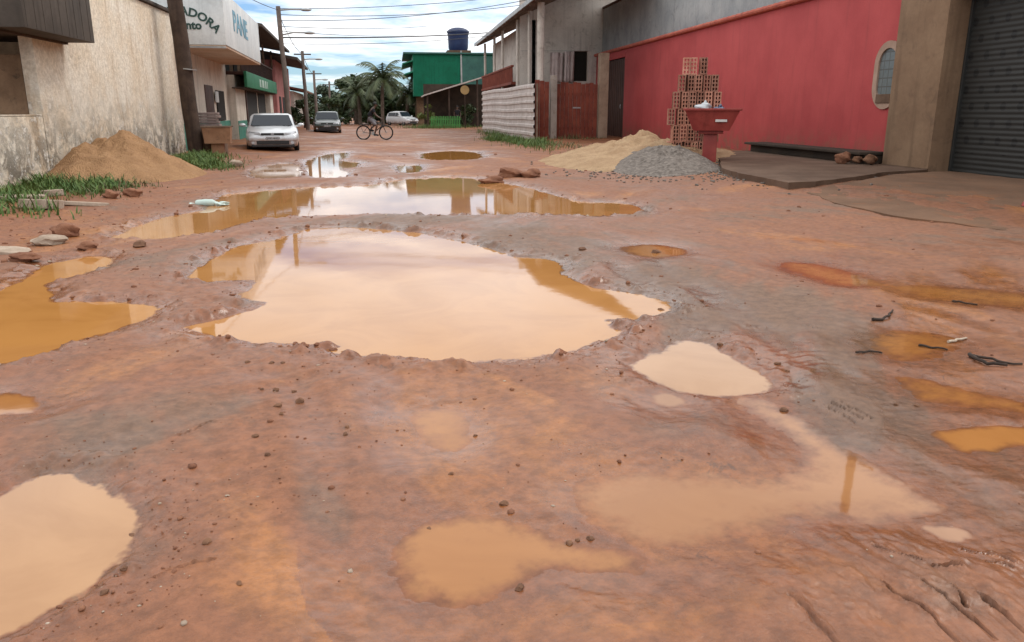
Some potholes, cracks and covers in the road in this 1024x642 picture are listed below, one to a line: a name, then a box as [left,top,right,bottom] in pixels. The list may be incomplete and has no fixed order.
pothole [884,282,1024,309]
pothole [607,329,794,400]
pothole [0,249,177,366]
pothole [299,151,367,178]
pothole [241,162,306,178]
pothole [375,509,664,619]
pothole [772,260,893,288]
pothole [95,175,654,240]
pothole [0,456,166,642]
pothole [169,221,689,365]
pothole [921,421,1024,457]
pothole [562,394,957,557]
